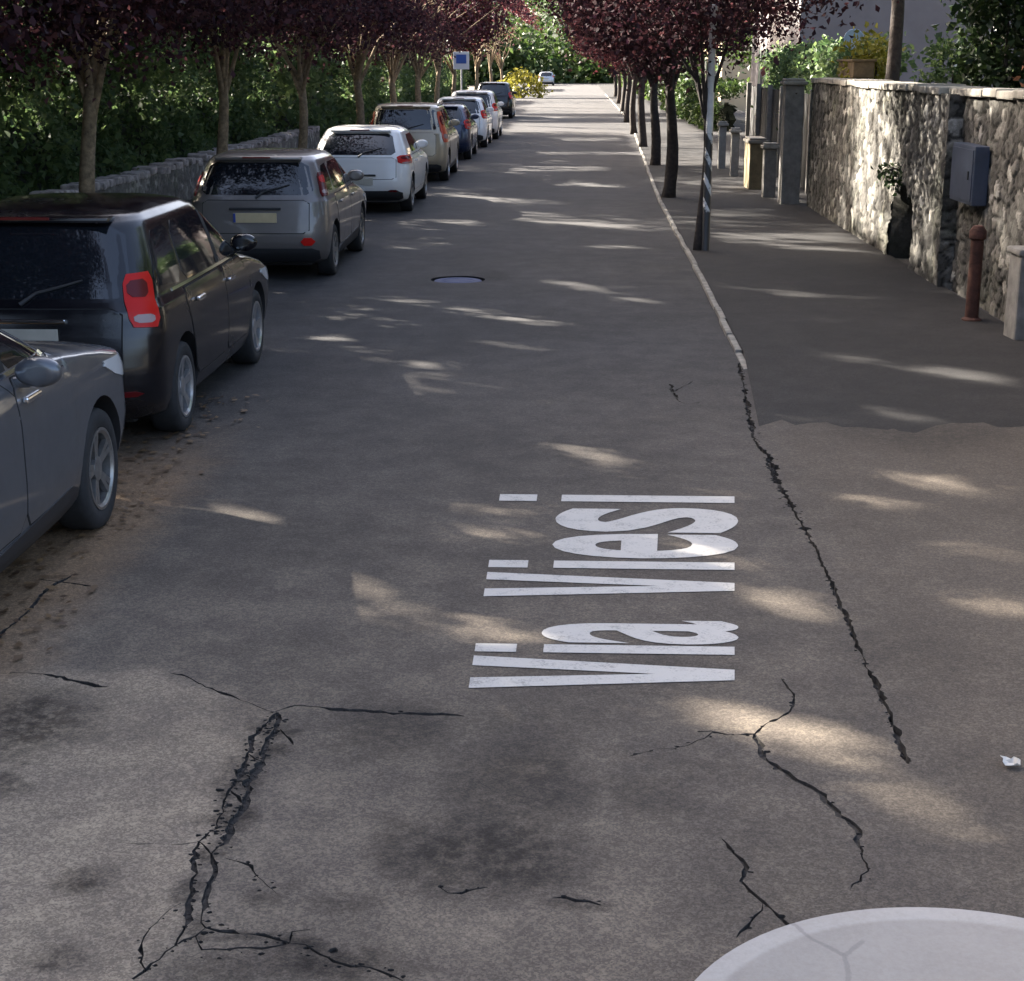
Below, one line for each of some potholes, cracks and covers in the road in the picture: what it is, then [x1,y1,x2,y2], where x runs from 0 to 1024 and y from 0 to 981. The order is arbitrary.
crack [129,673,462,981]
crack [10,672,108,687]
crack [631,363,911,938]
crack [554,895,601,905]
crack [438,885,487,895]
crack [0,576,90,638]
